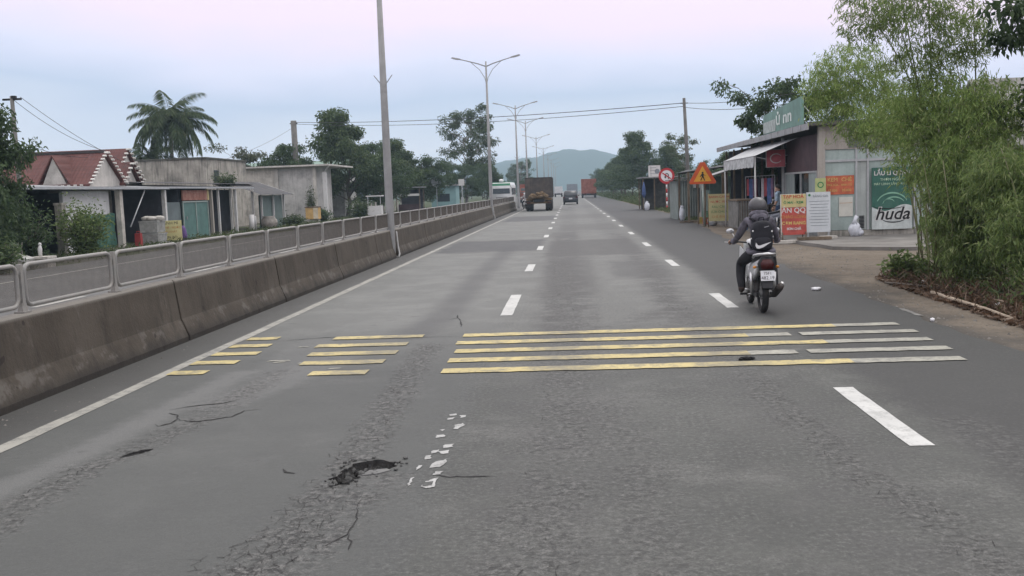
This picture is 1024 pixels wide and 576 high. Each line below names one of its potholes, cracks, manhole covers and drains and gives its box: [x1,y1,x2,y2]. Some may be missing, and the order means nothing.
crack [4,399,257,533]
crack [187,315,462,576]
pothole [321,456,408,489]
